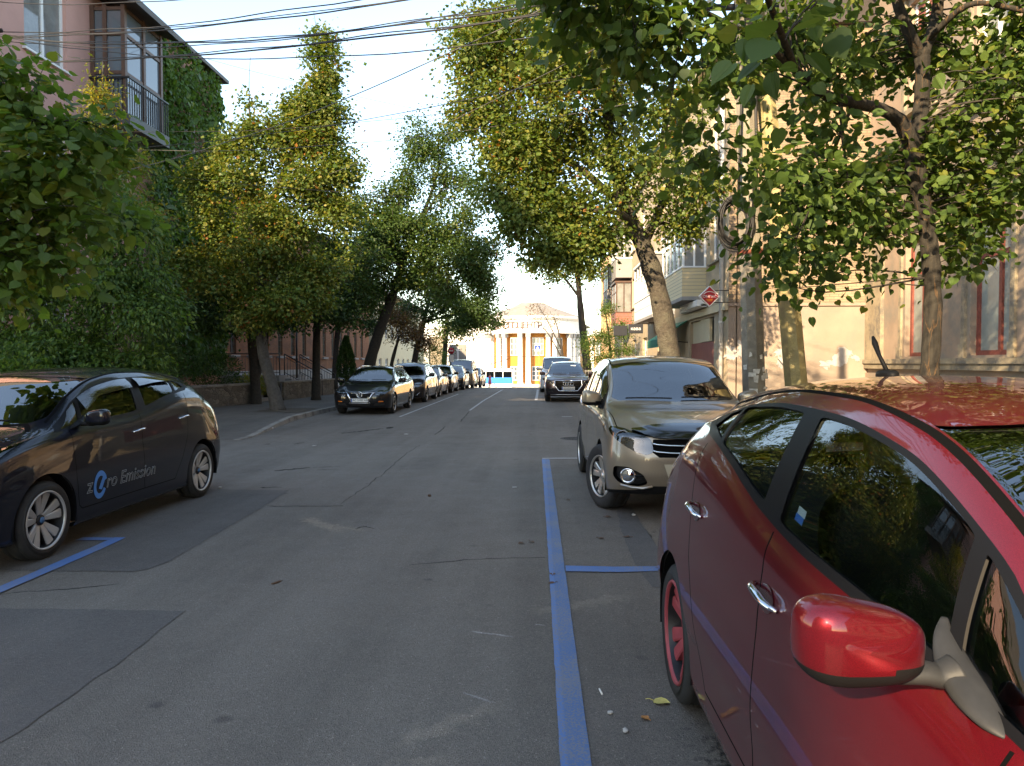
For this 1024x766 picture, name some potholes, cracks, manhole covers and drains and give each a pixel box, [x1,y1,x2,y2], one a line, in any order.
crack [0,584,114,595]
crack [412,557,545,565]
